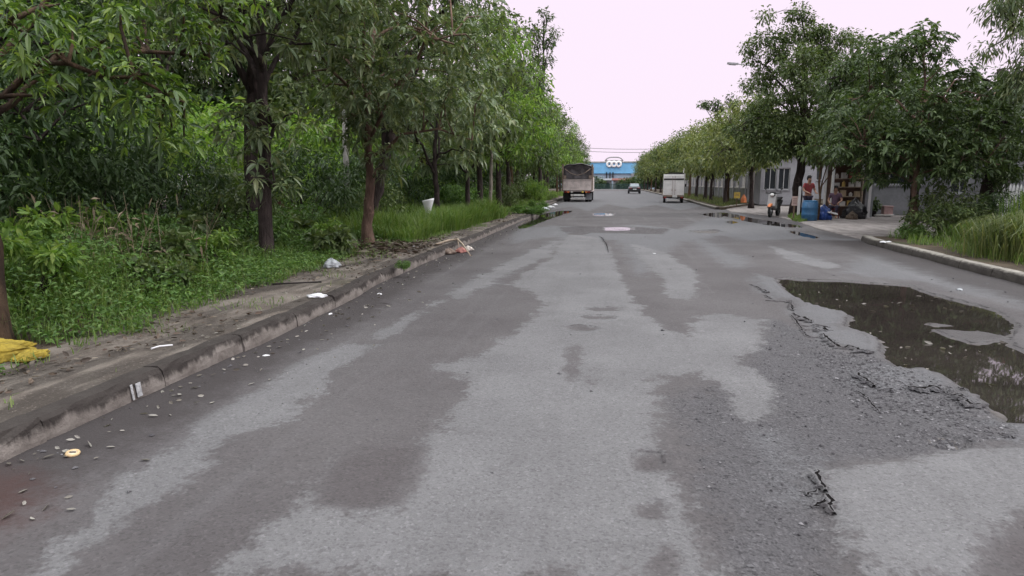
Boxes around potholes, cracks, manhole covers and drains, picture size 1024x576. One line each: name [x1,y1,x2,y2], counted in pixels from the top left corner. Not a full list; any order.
crack [803,469,840,515]
pothole [768,276,1024,429]
pothole [901,425,993,455]
